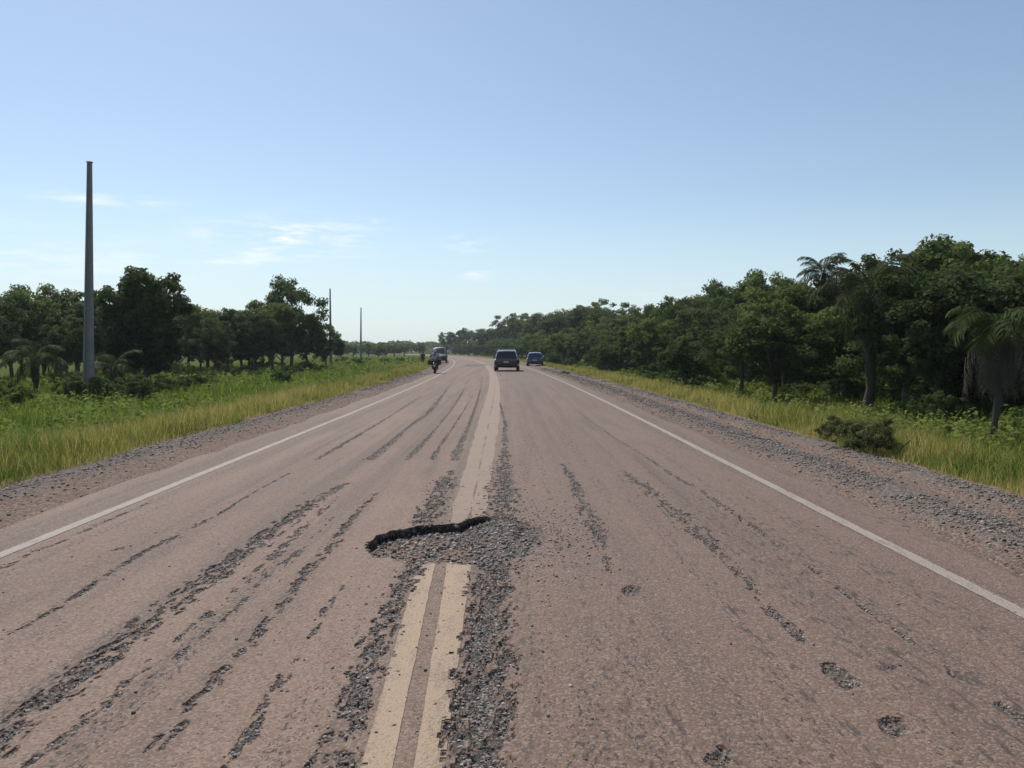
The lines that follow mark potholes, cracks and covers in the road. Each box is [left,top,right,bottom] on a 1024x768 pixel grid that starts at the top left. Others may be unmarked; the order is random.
pothole [702,744,737,768]
pothole [875,714,914,738]
pothole [990,700,1024,727]
crack [0,473,380,768]
crack [560,413,921,646]
pothole [365,516,554,569]
pothole [621,585,643,597]
pothole [819,661,862,691]
